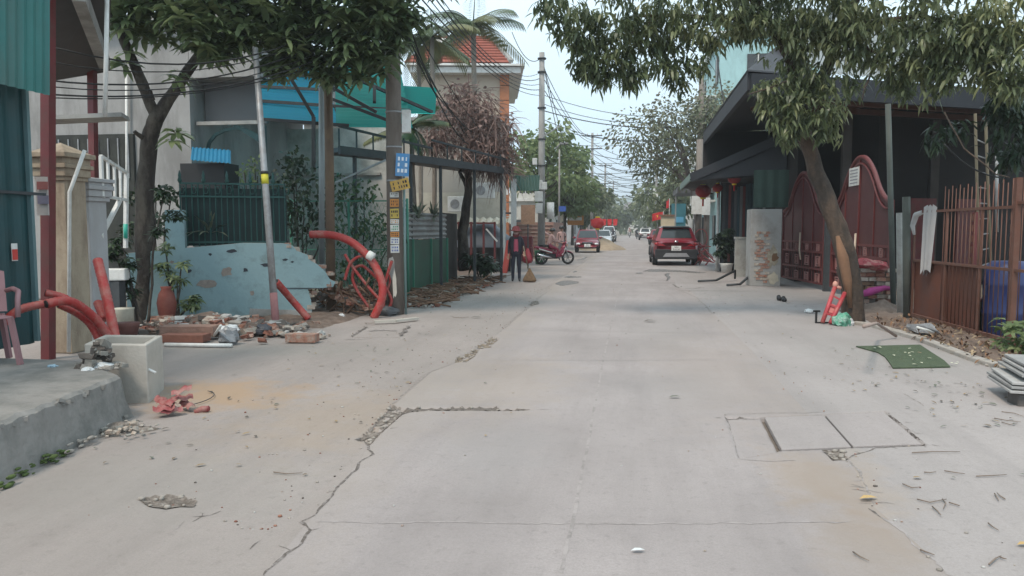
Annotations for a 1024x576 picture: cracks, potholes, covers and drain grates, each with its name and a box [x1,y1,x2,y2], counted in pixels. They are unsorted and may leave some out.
crack [250,289,551,576]
manhole cover [764,415,851,451]
manhole cover [825,412,921,448]
